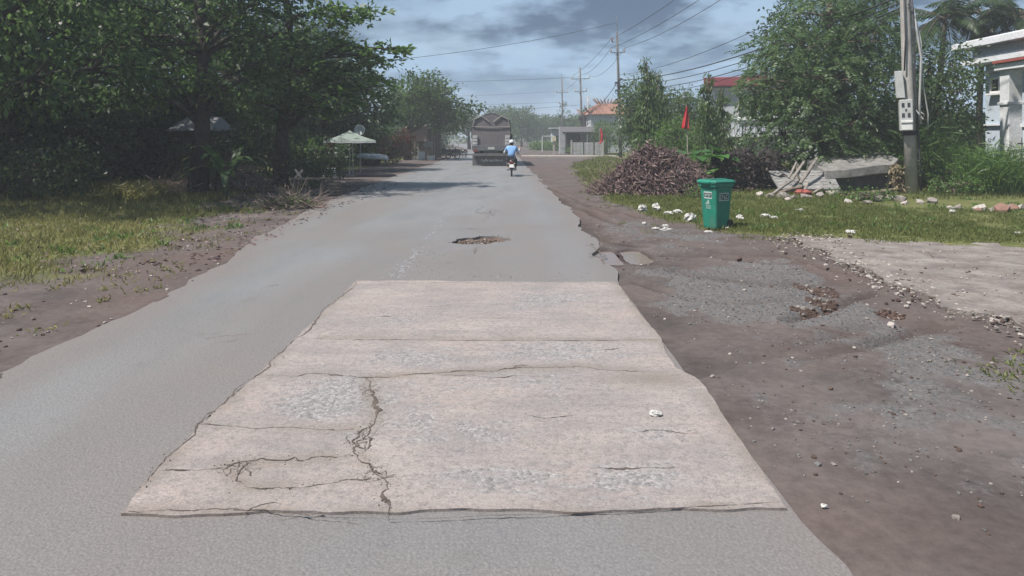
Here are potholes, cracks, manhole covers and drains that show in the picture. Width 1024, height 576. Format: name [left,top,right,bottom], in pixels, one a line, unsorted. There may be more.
pothole [789,283,841,320]
pothole [449,235,510,245]
crack [133,285,681,521]
